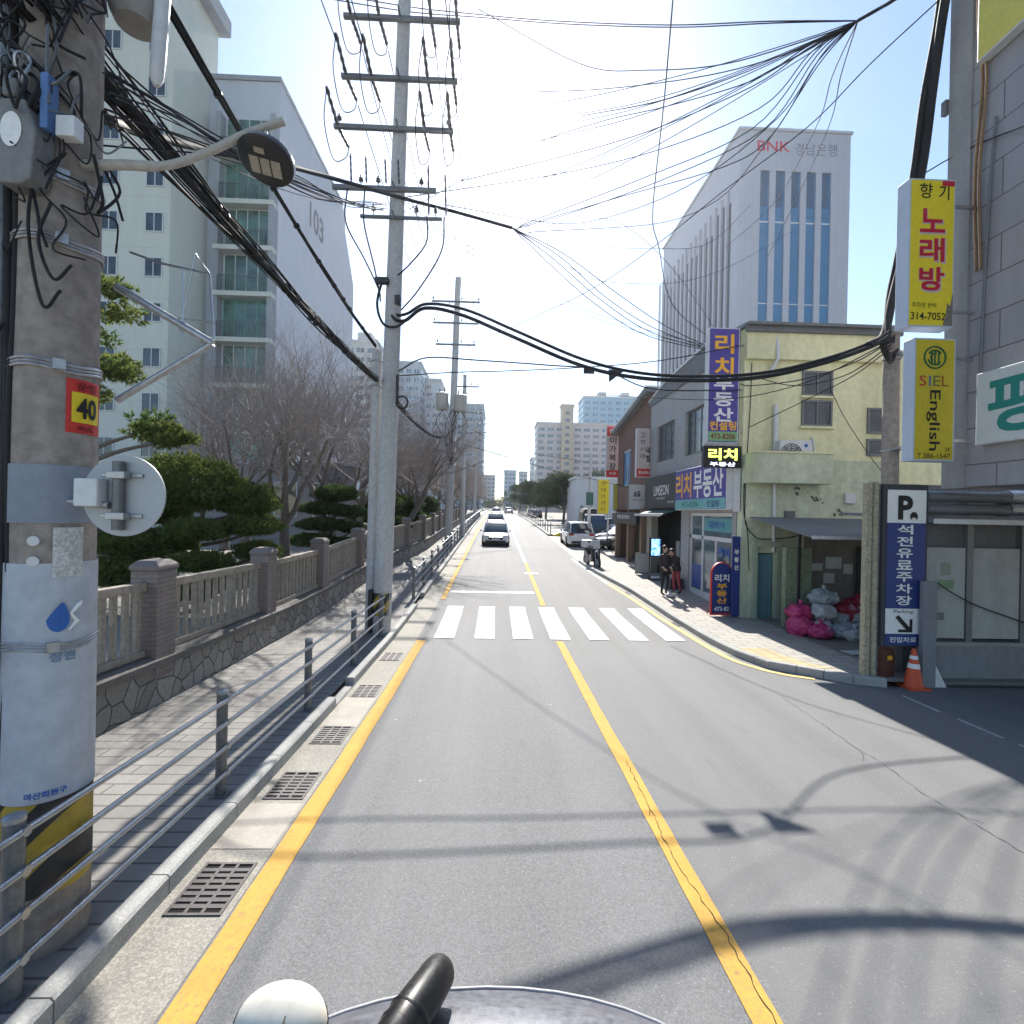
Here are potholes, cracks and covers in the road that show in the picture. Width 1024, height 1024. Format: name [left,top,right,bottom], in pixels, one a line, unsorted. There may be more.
drain grate [379,653,404,661]
drain grate [350,685,383,697]
drain grate [262,771,322,800]
drain grate [162,862,258,916]
drain grate [309,726,354,744]
crack [781,696,1024,853]
